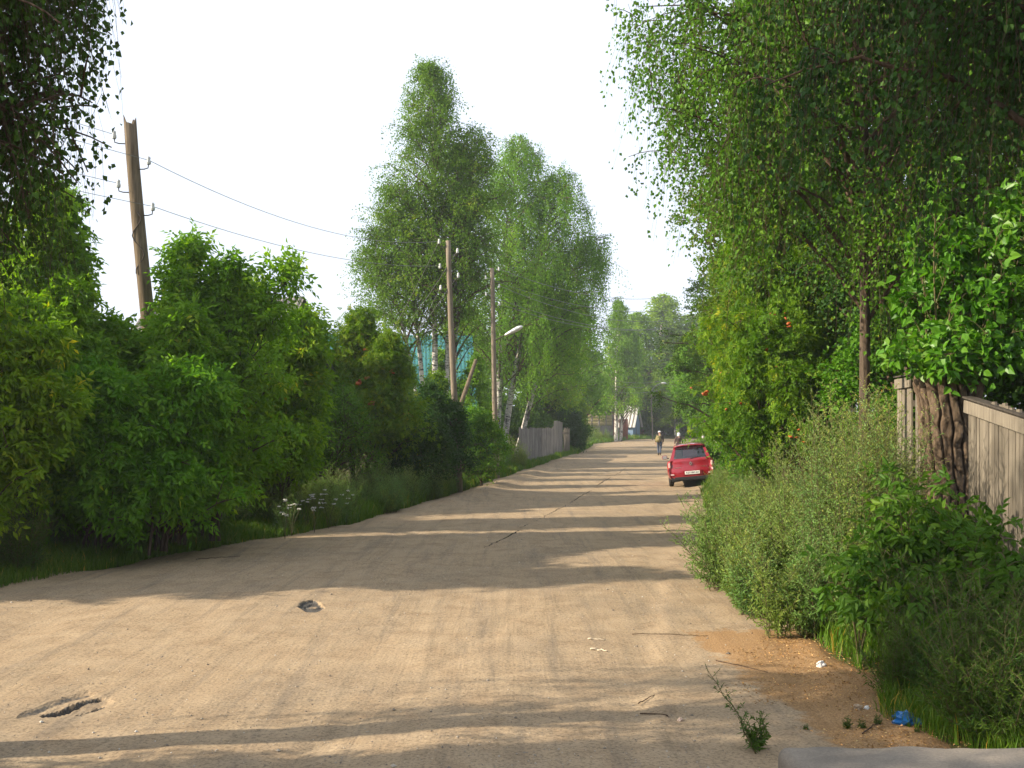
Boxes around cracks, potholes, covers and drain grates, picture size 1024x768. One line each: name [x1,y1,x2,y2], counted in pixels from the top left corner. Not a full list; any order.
pothole [297,599,325,612]
pothole [15,689,120,720]
crack [485,467,627,547]
